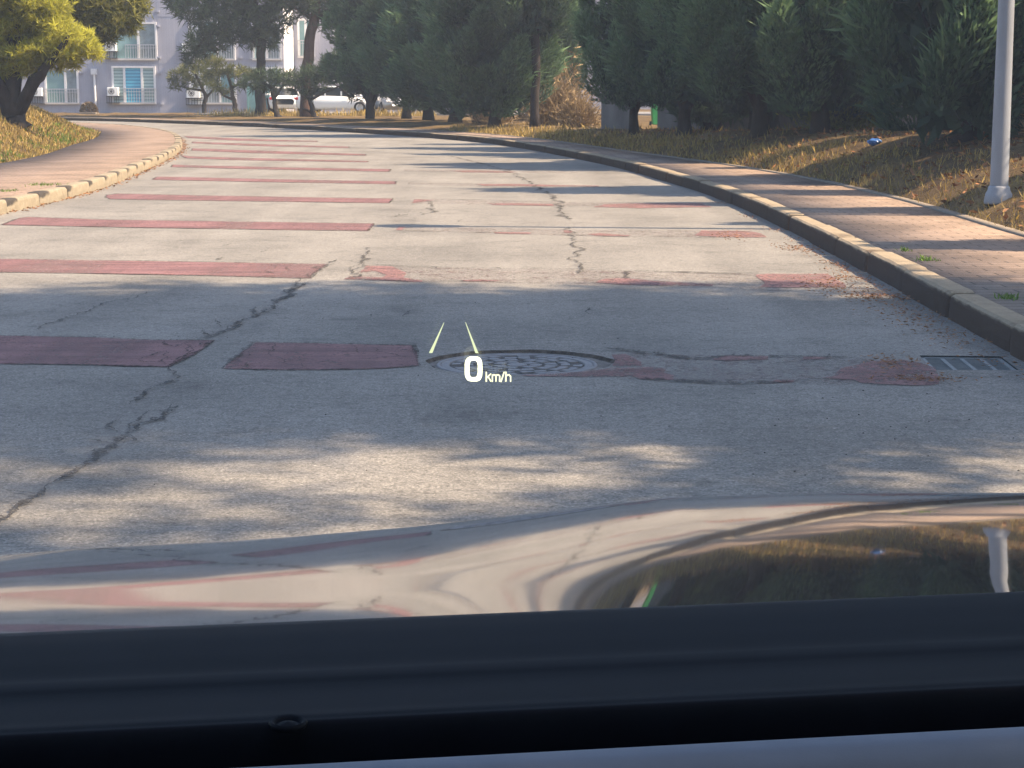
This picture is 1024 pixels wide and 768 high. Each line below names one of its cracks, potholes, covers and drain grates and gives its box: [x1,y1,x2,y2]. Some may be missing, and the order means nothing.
drain grate [920,355,1018,370]
manhole cover [425,349,615,375]
crack [458,157,588,274]
crack [234,344,412,368]
crack [0,247,370,521]
